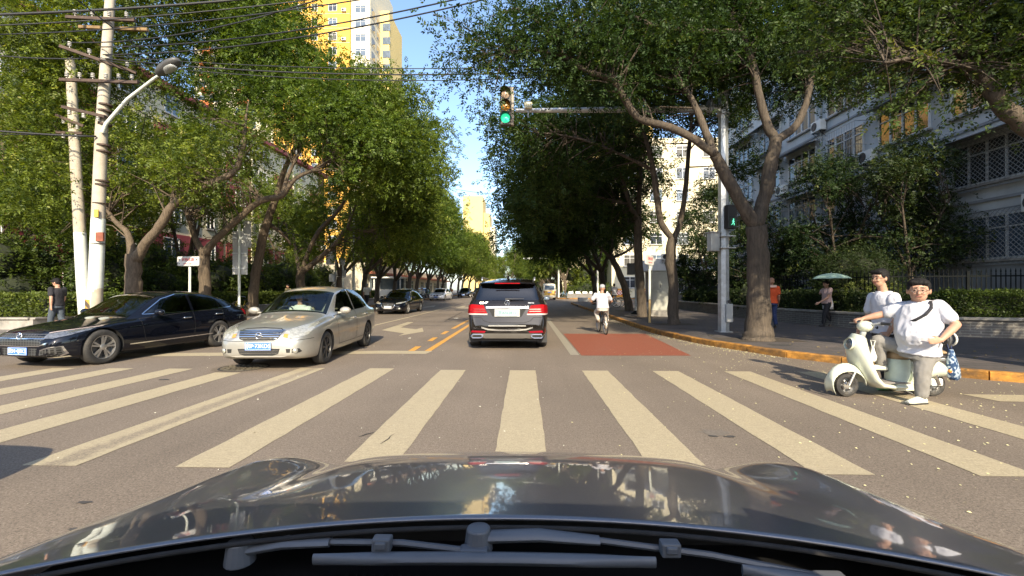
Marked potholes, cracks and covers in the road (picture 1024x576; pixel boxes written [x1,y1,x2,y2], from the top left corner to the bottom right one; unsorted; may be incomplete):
manhole cover [217,363,270,371]
